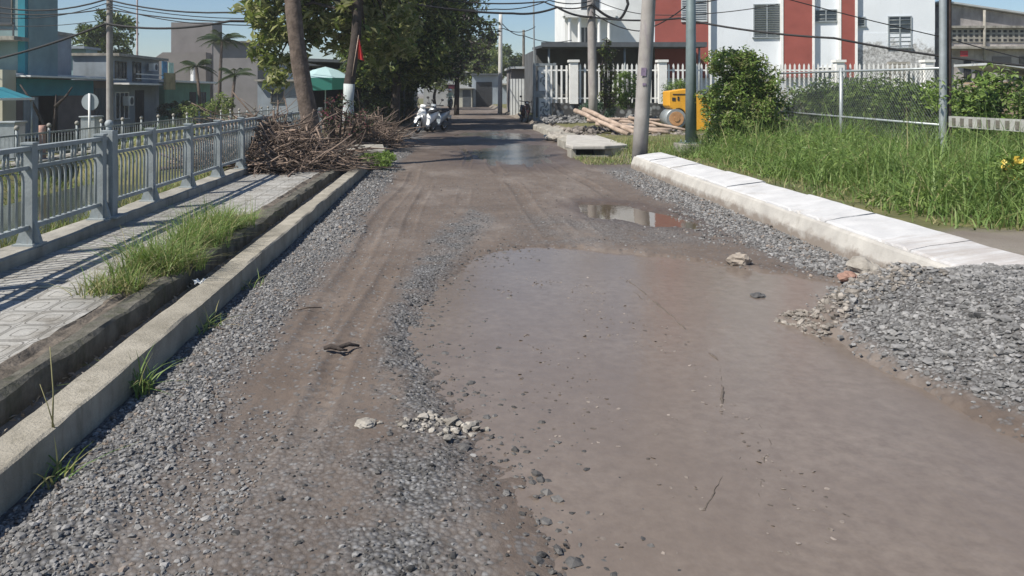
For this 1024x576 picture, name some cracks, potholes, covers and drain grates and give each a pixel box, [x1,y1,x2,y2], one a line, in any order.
pothole [574,201,707,229]
pothole [456,141,571,168]
pothole [403,244,1024,576]
